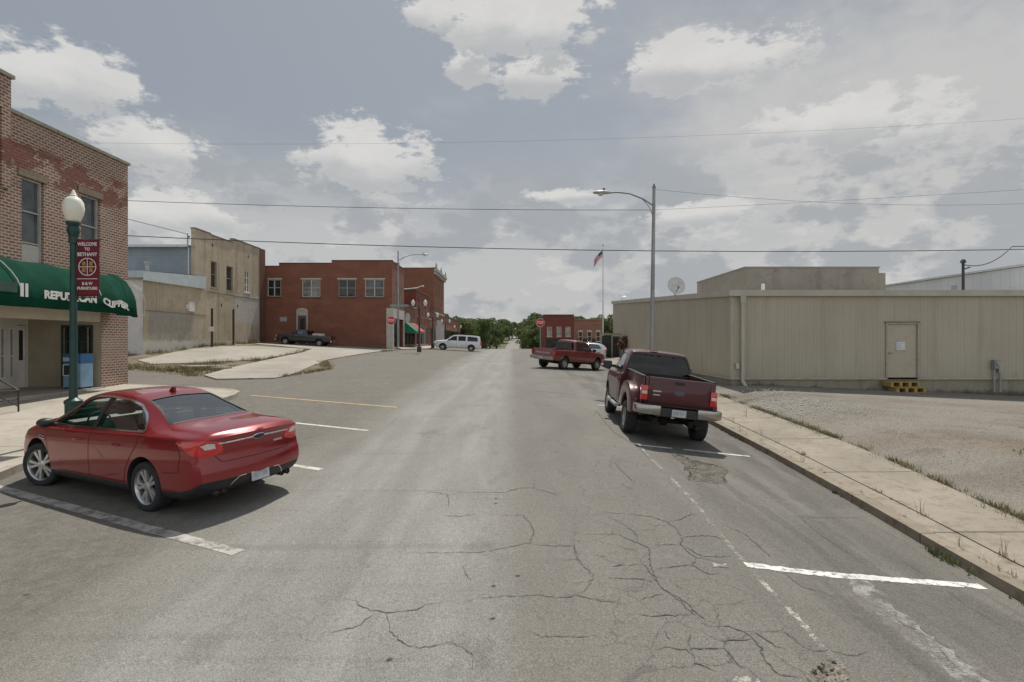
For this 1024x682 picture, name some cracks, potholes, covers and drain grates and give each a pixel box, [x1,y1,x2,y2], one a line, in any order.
pothole [672,454,728,484]
crack [332,597,474,667]
pothole [806,659,850,682]
crack [607,512,866,677]
crack [414,482,627,604]
